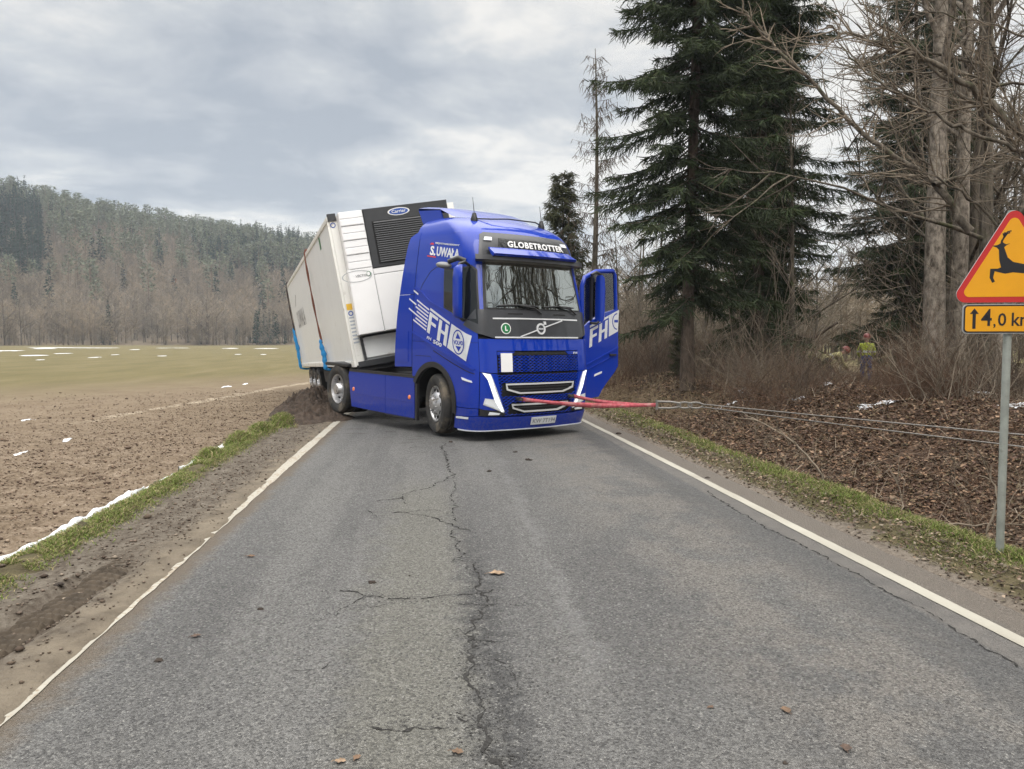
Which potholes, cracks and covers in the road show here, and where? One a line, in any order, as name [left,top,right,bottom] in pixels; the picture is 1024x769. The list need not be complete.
crack [318,447,548,769]
